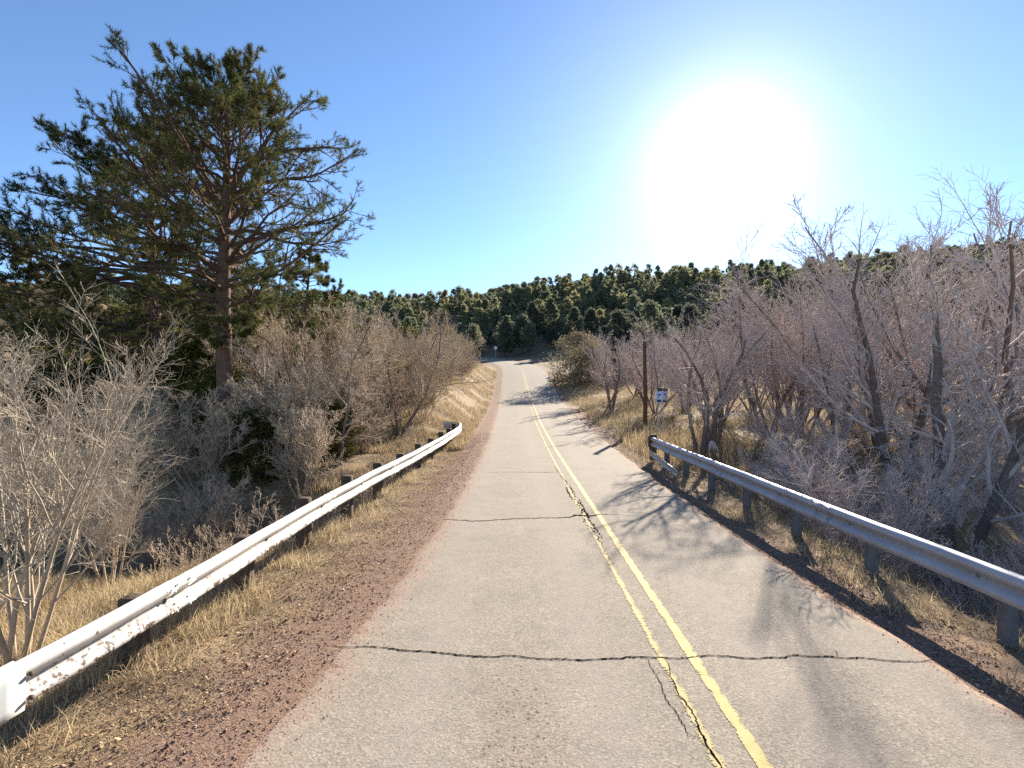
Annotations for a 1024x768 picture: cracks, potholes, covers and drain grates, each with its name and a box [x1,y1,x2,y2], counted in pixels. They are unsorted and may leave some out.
crack [453,469,694,565]
crack [337,646,934,768]
